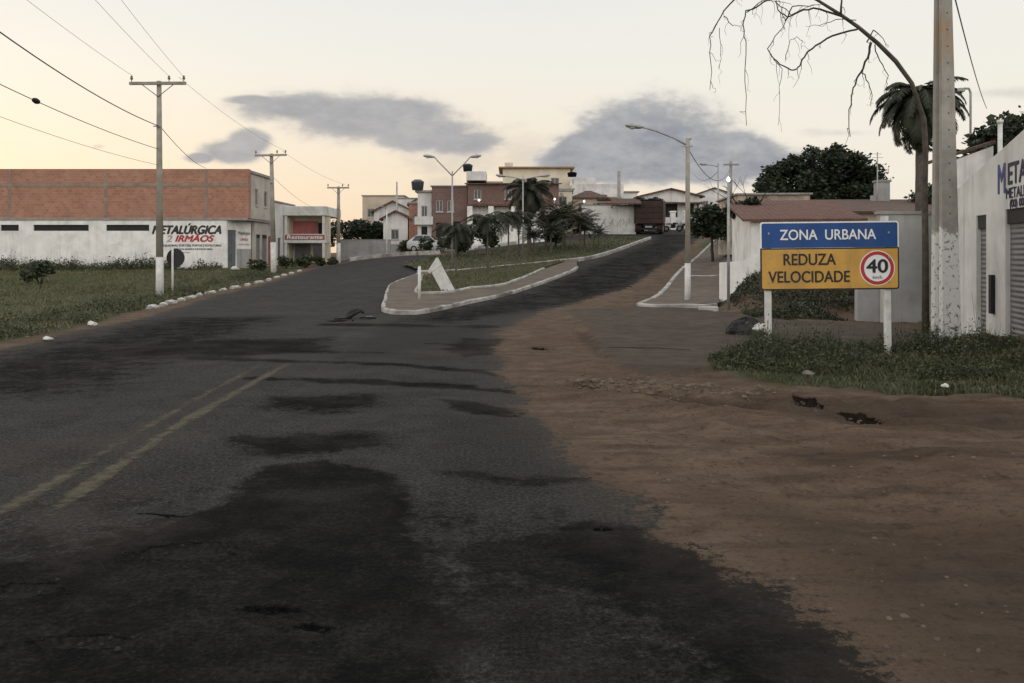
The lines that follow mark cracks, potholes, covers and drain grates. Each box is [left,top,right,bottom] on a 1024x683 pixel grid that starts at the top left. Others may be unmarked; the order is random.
pothole [226,599,319,622]
pothole [820,409,899,425]
pothole [274,620,346,641]
pothole [579,523,623,535]
pothole [780,392,836,413]
